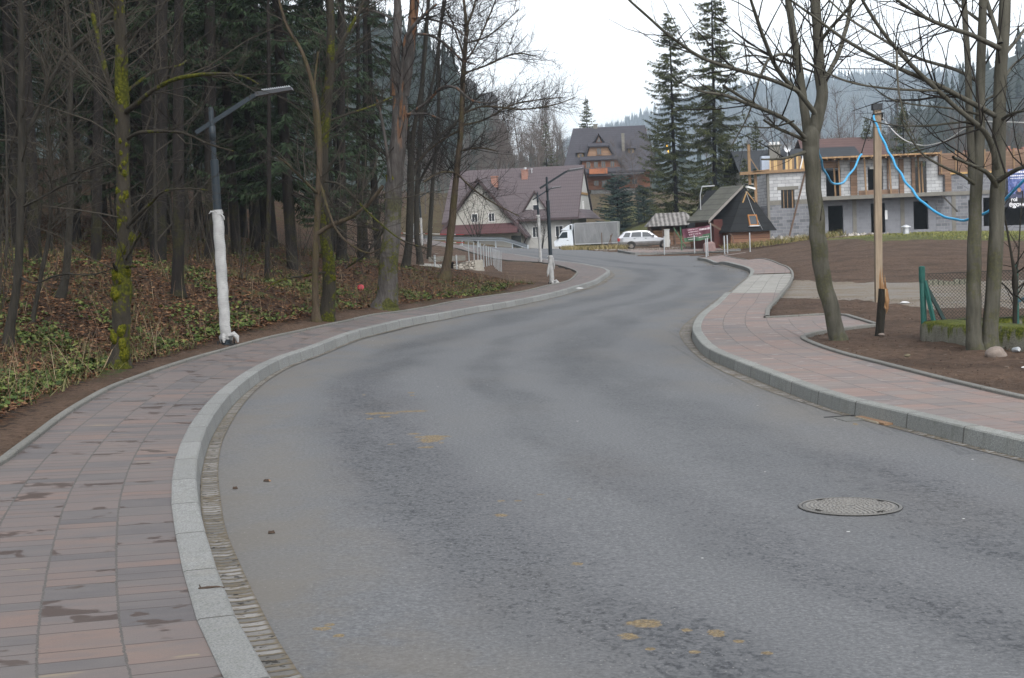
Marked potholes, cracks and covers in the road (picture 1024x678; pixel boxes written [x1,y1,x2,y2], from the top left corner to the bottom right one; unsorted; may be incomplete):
manhole cover [798,497,903,516]
